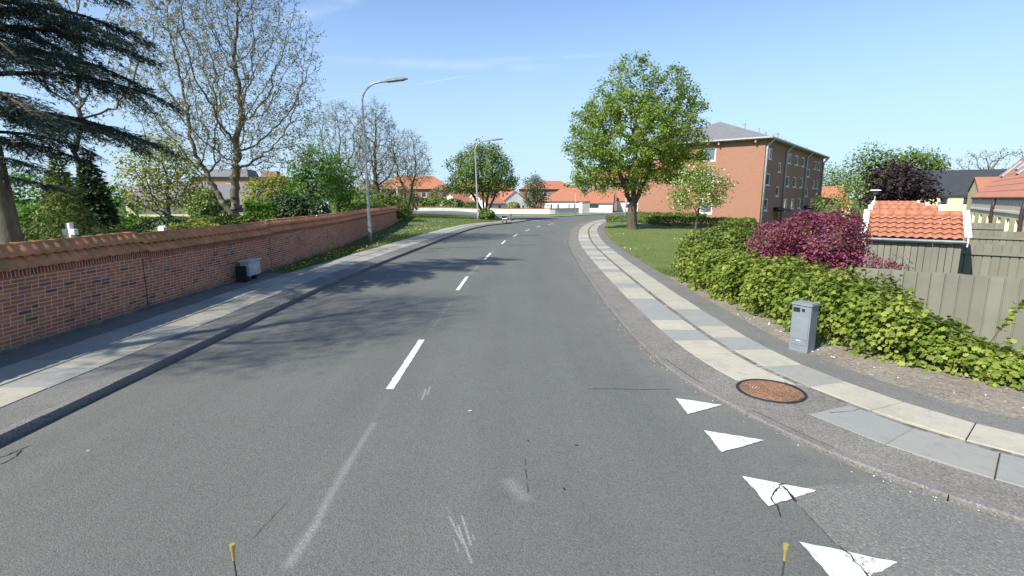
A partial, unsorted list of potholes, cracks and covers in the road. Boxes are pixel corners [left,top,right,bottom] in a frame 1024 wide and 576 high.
crack [770,483,869,576]
manhole cover [736,379,807,404]
